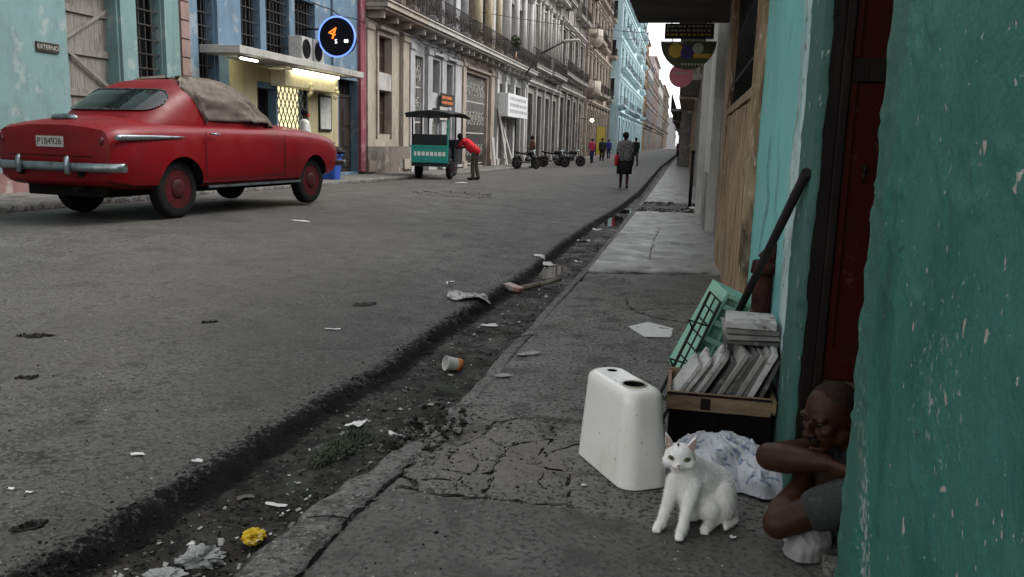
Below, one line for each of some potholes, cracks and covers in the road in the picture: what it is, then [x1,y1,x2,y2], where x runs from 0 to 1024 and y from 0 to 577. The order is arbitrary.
pothole [8,519,49,533]
